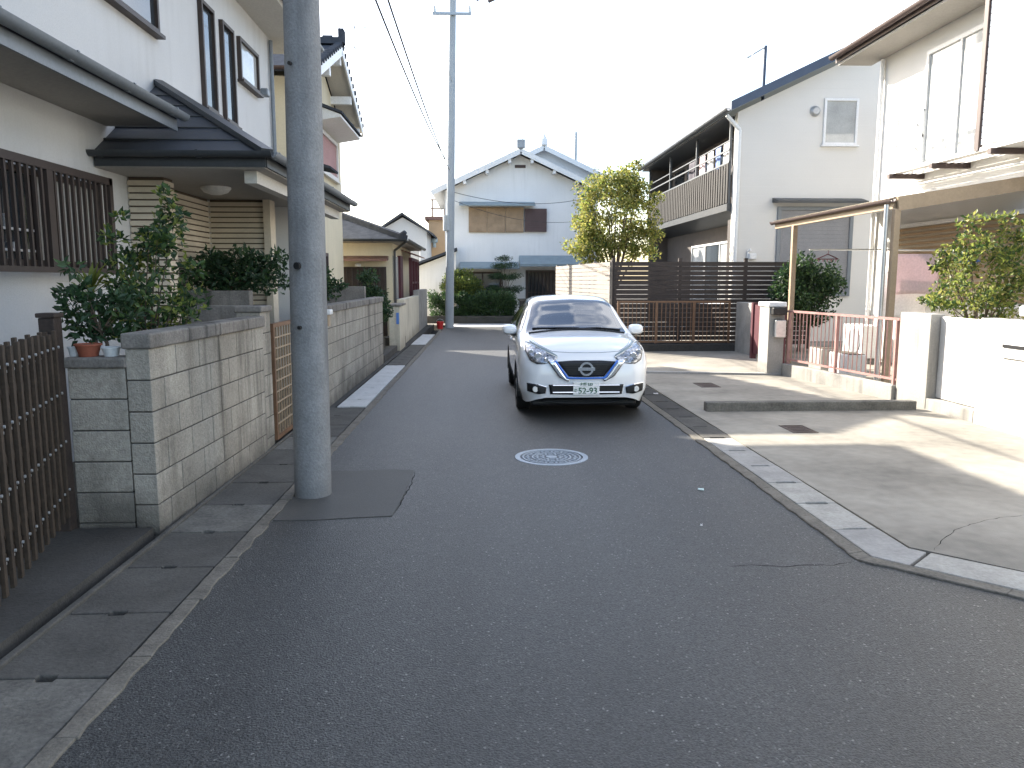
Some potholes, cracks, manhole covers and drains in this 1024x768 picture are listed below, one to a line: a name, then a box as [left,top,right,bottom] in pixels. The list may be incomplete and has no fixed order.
manhole cover [515,449,588,466]
